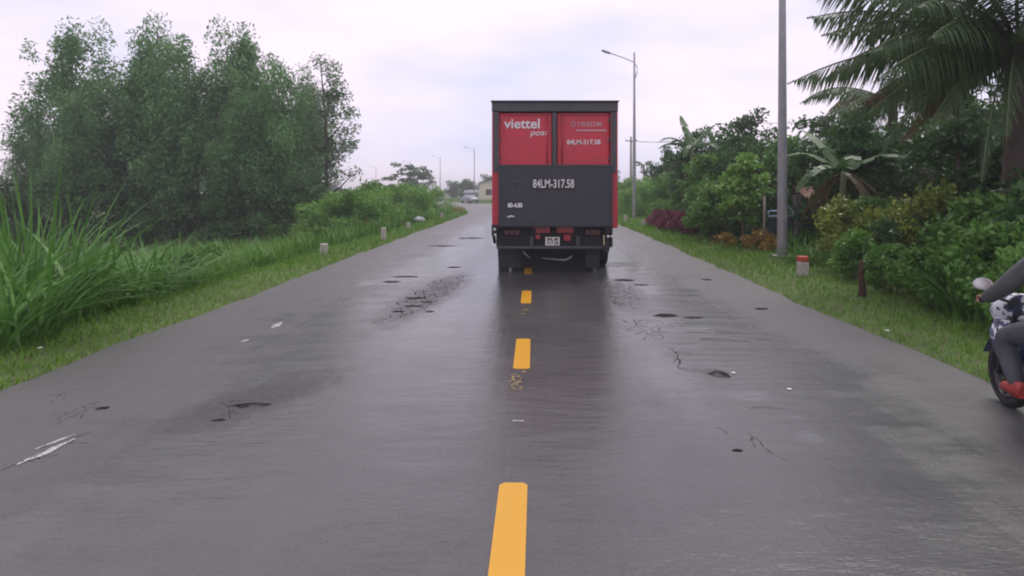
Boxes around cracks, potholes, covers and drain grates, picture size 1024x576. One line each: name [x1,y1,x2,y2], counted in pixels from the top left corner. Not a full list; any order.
crack [599,281,700,371]
crack [1,389,103,471]
pothole [707,370,731,378]
crack [378,275,464,322]
